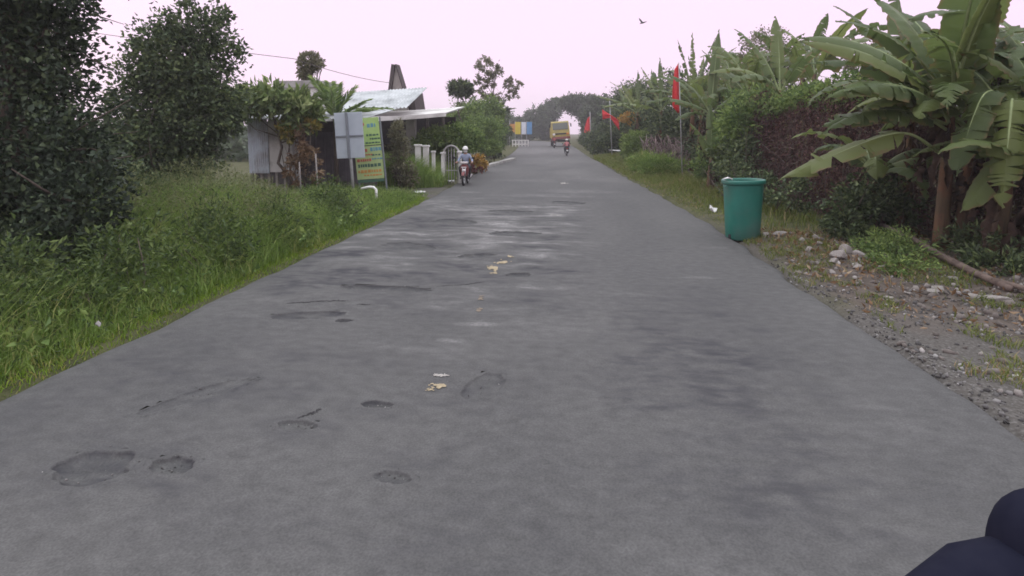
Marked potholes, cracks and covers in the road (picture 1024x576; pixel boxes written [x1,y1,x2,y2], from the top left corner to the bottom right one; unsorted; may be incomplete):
pothole [42,447,144,492]
pothole [355,398,400,411]
pothole [330,317,358,325]
pothole [265,310,351,321]
pothole [129,376,264,418]
pothole [140,452,205,479]
pothole [366,467,420,489]
pothole [455,371,511,402]
pothole [270,417,324,434]
